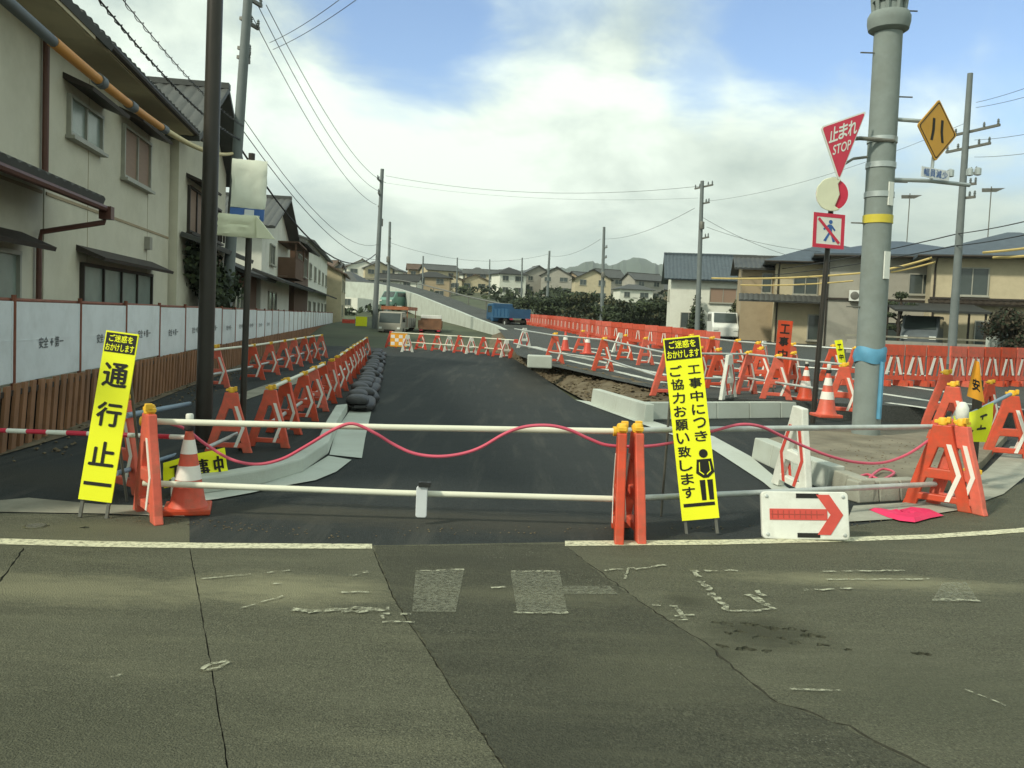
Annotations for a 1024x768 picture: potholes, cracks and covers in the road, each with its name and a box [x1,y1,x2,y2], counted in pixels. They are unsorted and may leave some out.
crack [190,550,228,768]
crack [0,548,24,582]
crack [571,550,930,768]
